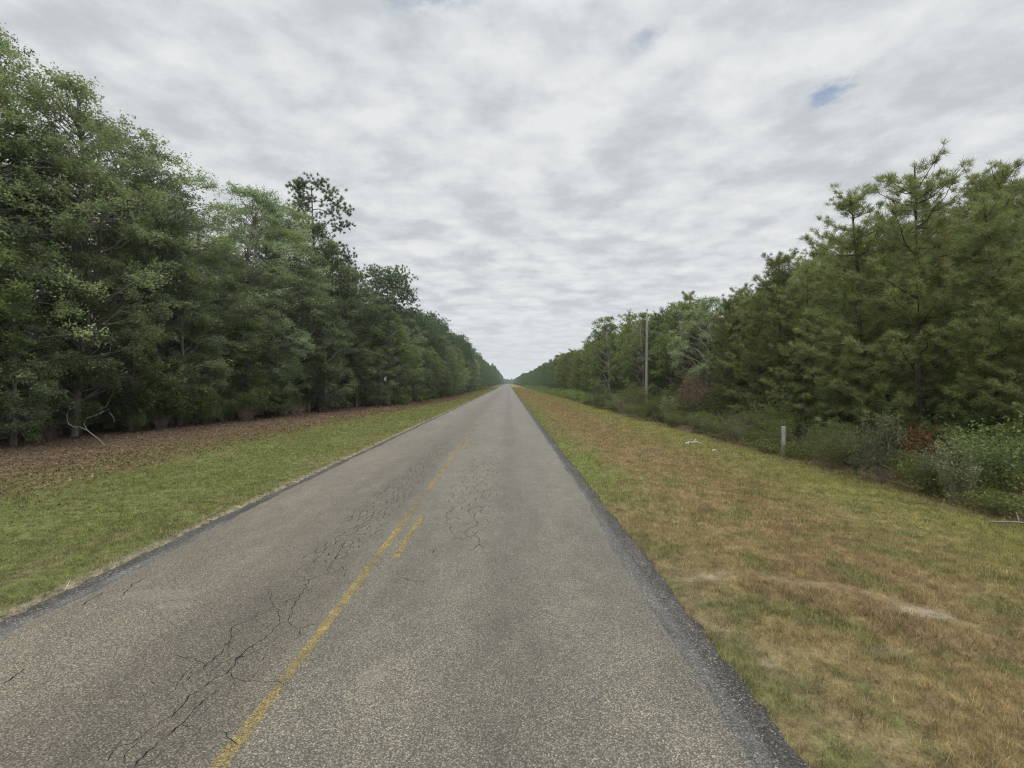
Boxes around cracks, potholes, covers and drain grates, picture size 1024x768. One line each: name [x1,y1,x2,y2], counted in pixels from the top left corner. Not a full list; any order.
crack [430,459,498,552]
crack [84,548,345,768]
